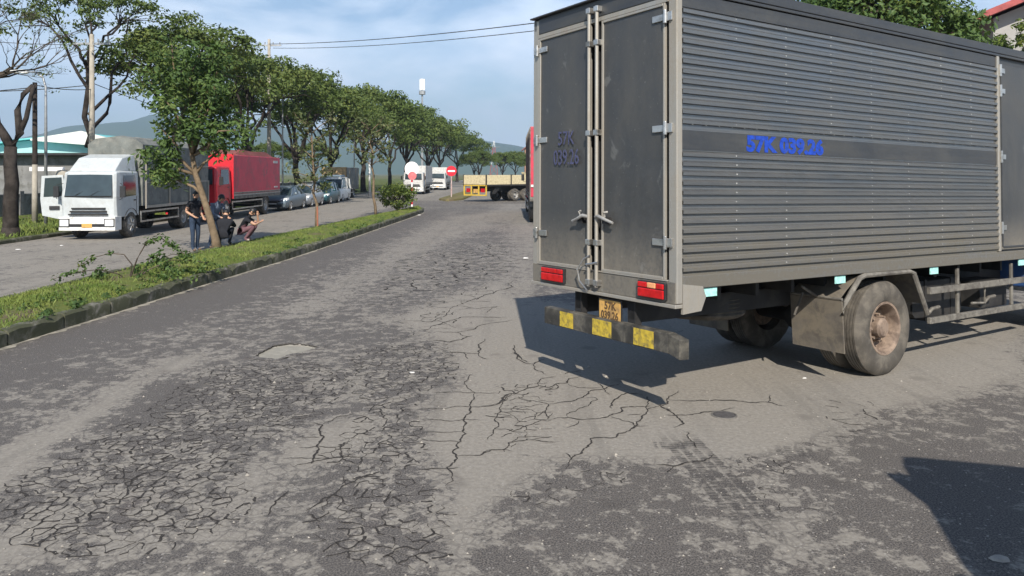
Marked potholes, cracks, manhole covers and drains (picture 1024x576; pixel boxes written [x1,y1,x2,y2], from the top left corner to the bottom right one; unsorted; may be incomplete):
pothole [247,341,328,361]
crack [0,361,350,557]
crack [268,242,782,570]
